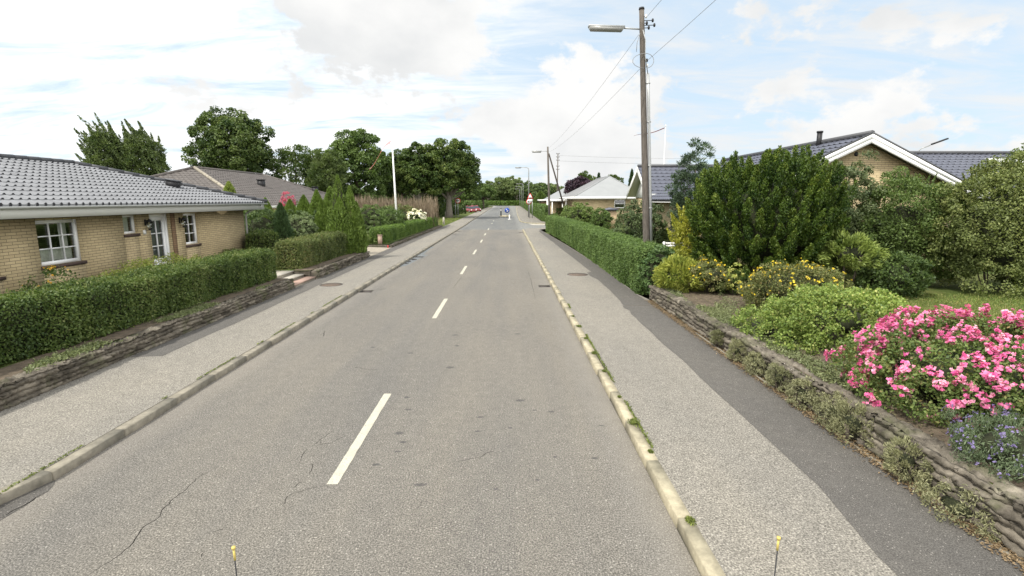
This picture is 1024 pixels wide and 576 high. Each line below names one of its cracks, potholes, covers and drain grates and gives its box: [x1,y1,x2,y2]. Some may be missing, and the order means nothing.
crack [96,473,206,570]
crack [201,431,347,557]
